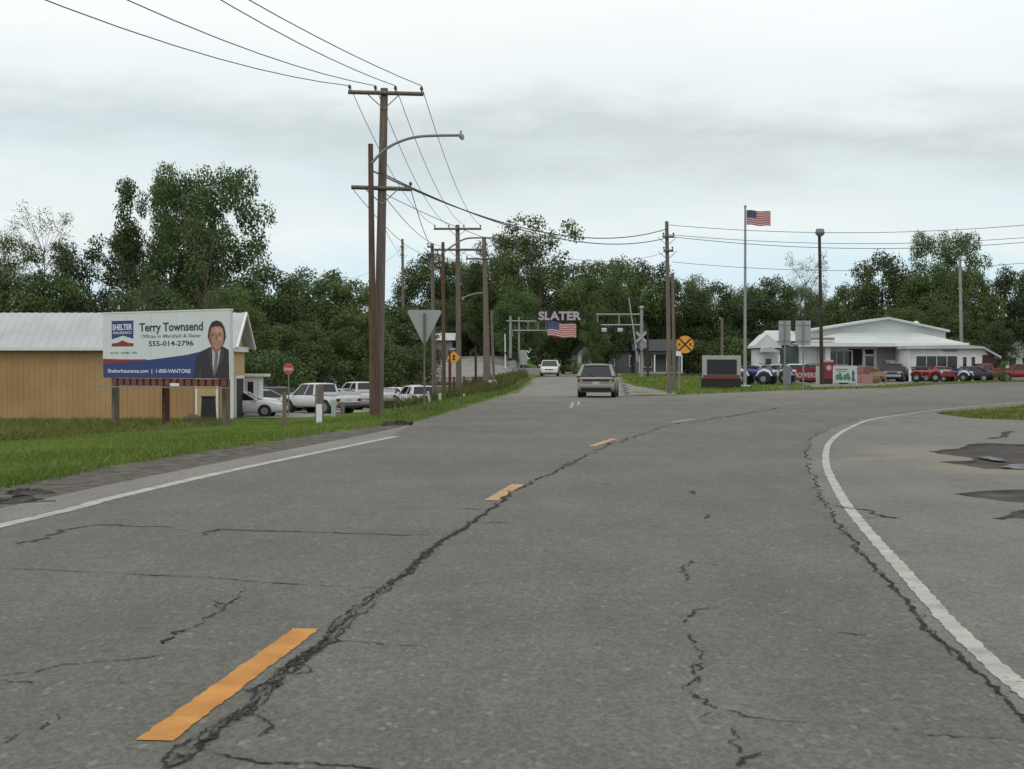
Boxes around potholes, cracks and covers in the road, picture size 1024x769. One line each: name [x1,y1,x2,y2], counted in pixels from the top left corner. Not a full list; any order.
crack [1,405,790,769]
crack [681,420,1024,766]
